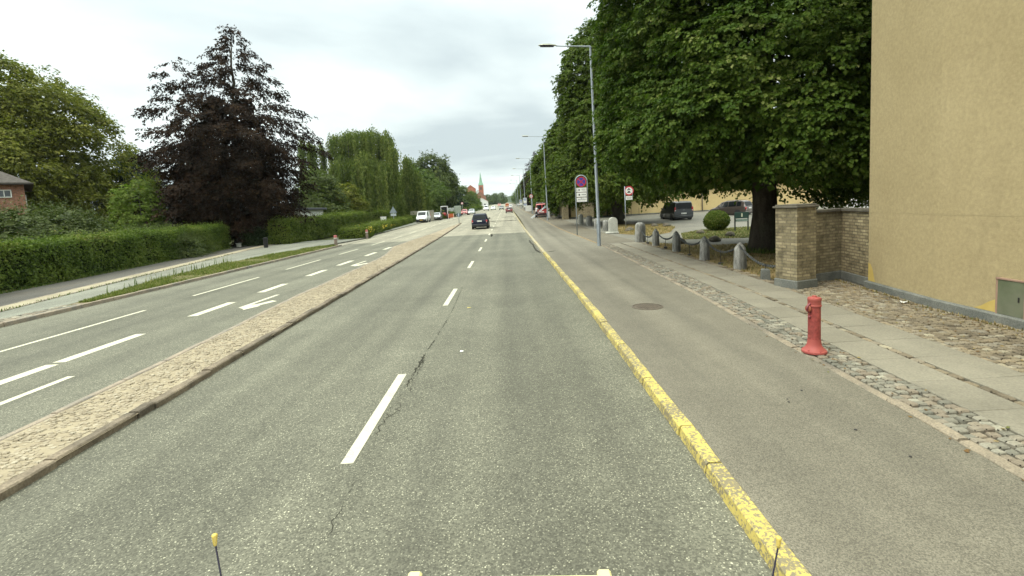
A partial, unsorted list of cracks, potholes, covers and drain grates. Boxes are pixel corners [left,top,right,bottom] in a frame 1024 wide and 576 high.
crack [374,296,459,442]
